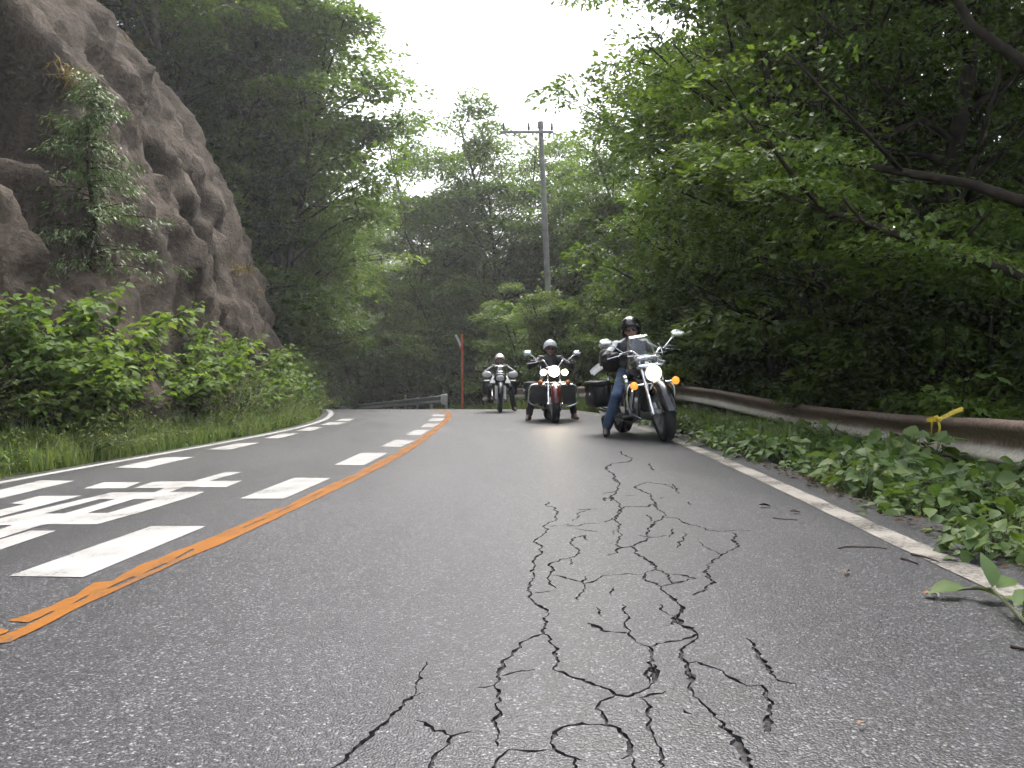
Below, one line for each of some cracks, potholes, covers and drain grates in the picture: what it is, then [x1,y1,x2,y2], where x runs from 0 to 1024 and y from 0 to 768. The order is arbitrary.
crack [332,451,796,768]
